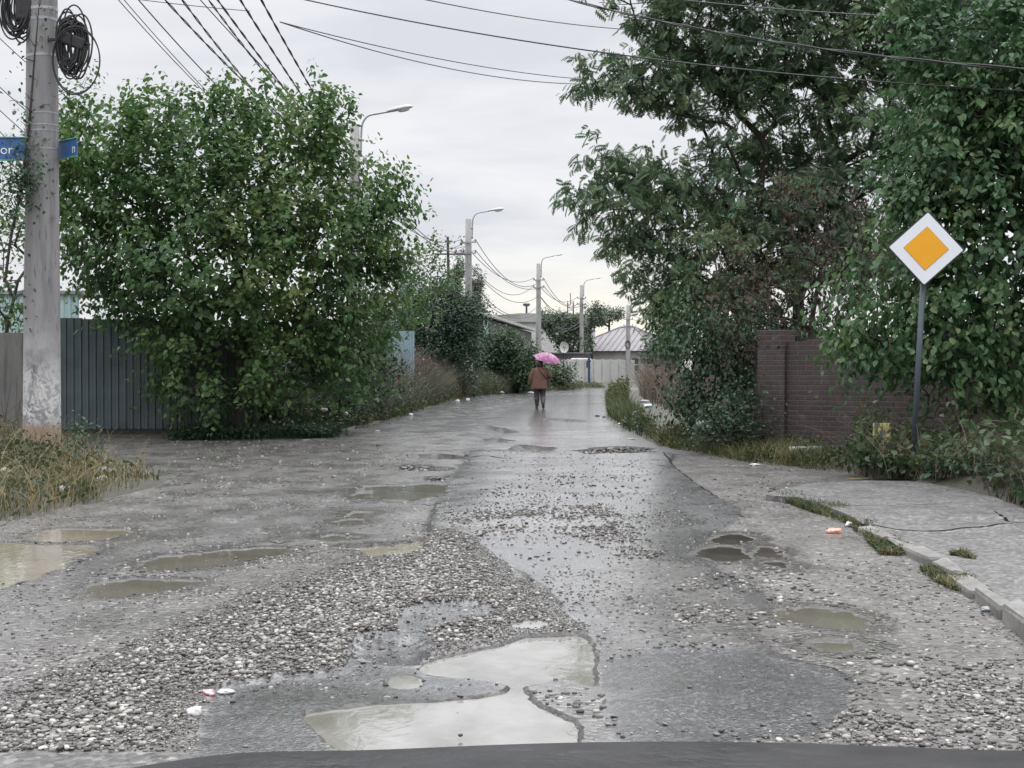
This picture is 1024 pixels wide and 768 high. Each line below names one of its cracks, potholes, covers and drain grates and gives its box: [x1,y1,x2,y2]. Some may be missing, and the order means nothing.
pothole [341,538,429,556]
pothole [139,547,295,571]
pothole [349,482,453,502]
pothole [772,605,875,631]
pothole [24,528,136,542]
pothole [0,542,101,590]
pothole [683,545,755,562]
pothole [748,546,790,559]
pothole [75,577,199,598]
pothole [759,560,793,570]
pothole [298,631,600,751]
